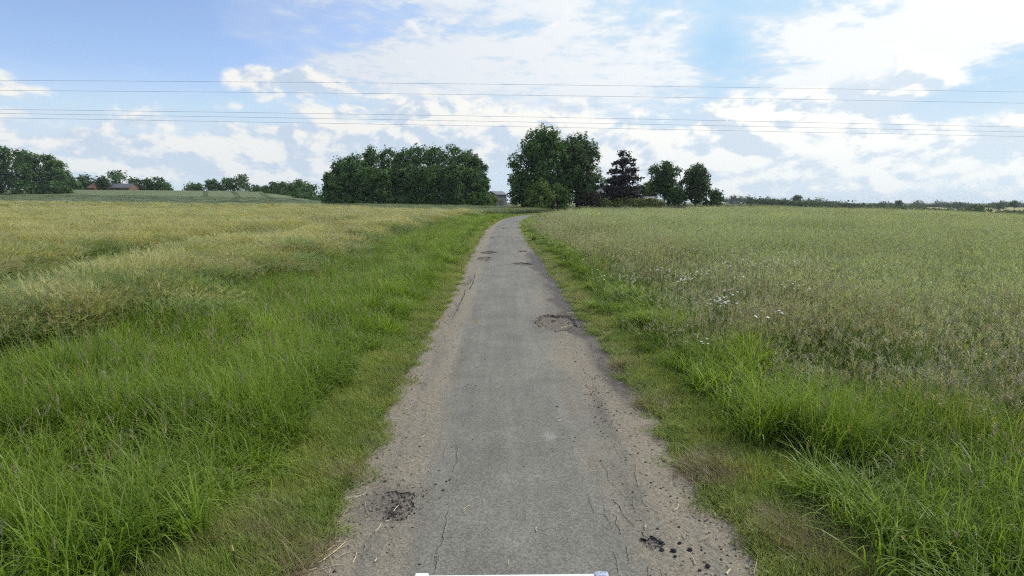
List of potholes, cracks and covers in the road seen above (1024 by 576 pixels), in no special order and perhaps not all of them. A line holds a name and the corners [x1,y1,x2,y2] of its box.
pothole [530,313,579,333]
crack [442,445,459,472]
crack [586,451,664,576]
crack [432,506,451,575]
crack [451,272,477,319]
pothole [638,536,665,550]
